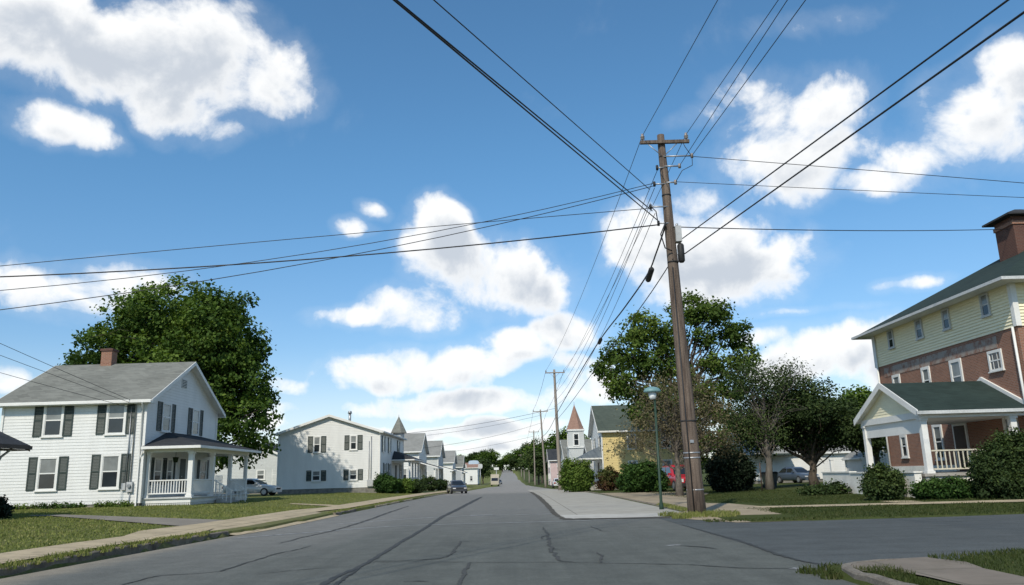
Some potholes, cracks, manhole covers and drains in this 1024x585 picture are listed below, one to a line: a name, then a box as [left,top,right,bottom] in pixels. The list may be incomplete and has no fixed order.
crack [376,541,744,585]
crack [540,527,562,561]
